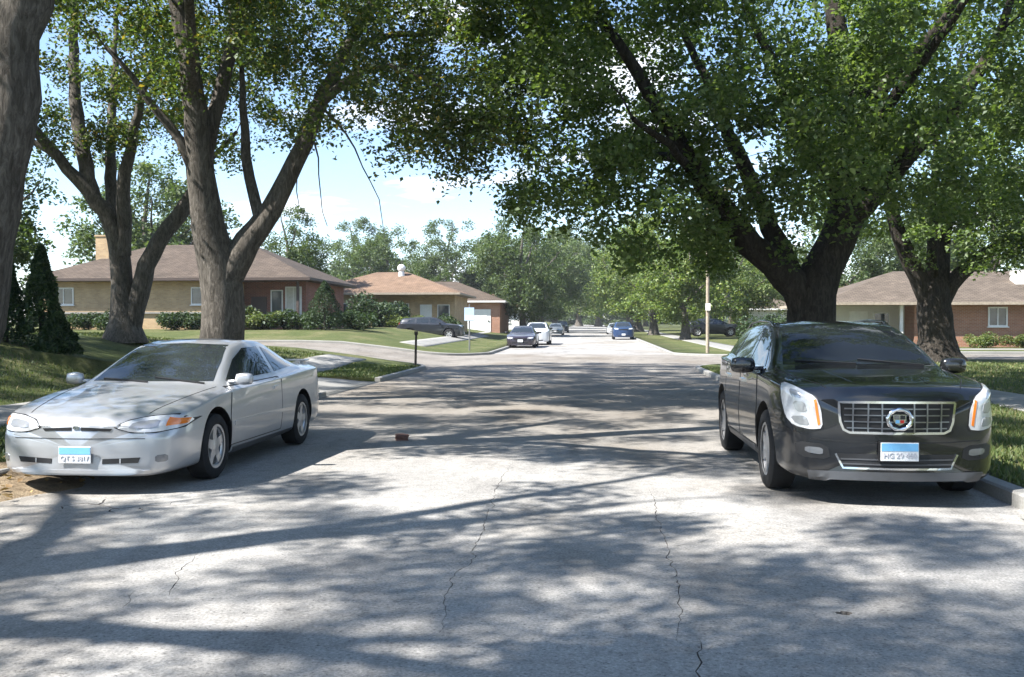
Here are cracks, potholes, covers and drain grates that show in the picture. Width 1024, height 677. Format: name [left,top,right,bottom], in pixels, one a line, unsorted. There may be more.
crack [442,463,513,629]
crack [635,490,706,677]
